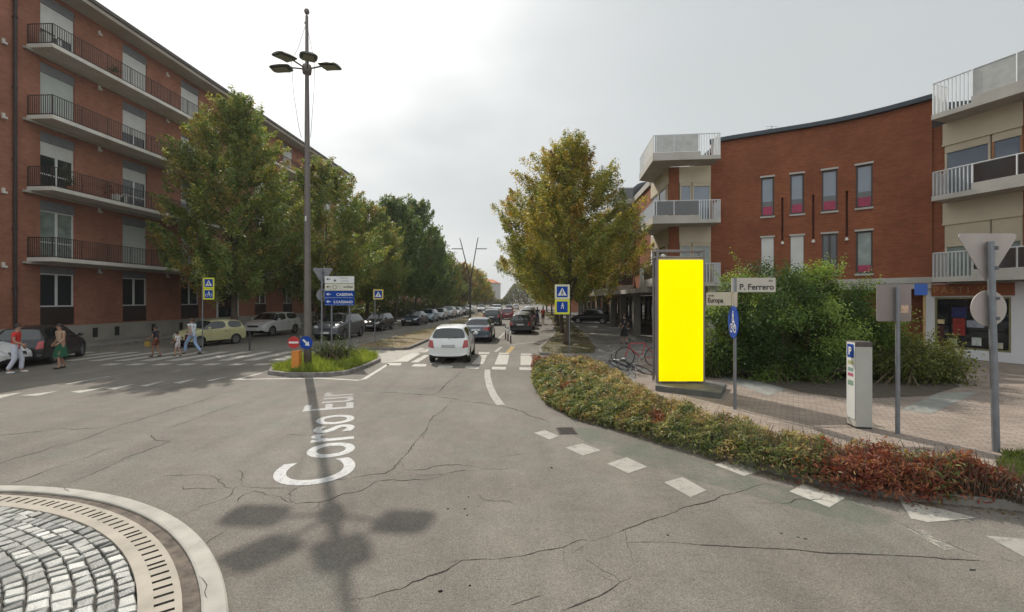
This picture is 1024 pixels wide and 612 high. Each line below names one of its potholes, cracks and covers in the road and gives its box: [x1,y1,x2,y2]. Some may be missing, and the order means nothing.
crack [167,376,546,546]
crack [2,399,215,491]
crack [343,483,821,601]
crack [560,539,635,612]
